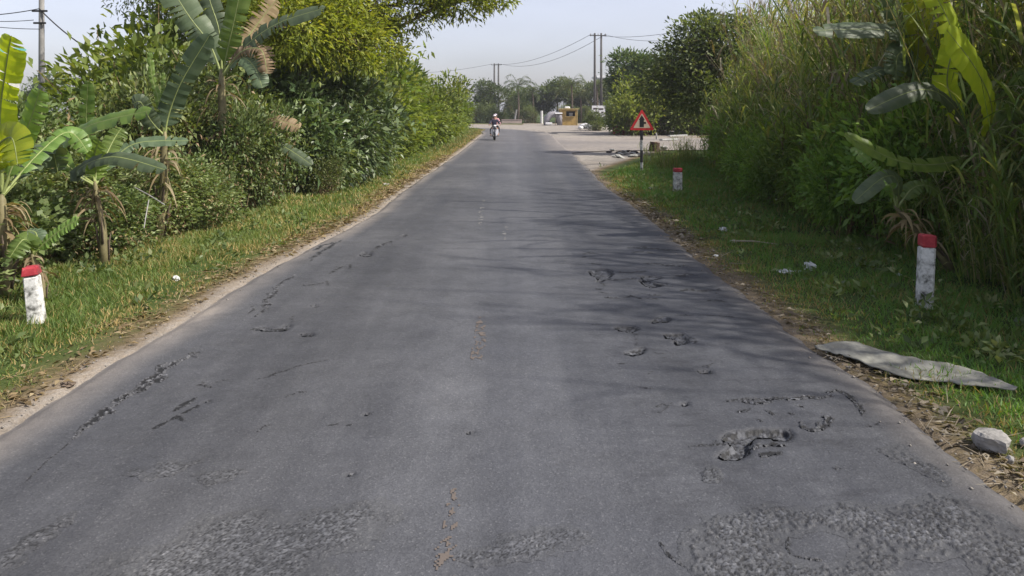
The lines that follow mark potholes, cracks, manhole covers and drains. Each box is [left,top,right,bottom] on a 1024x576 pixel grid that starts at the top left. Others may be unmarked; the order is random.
pothole [589,269,613,282]
pothole [664,333,689,346]
crack [723,388,879,458]
crack [247,240,352,330]
crack [25,351,229,482]
pothole [639,279,666,288]
pothole [720,428,791,461]
pothole [259,324,290,332]
